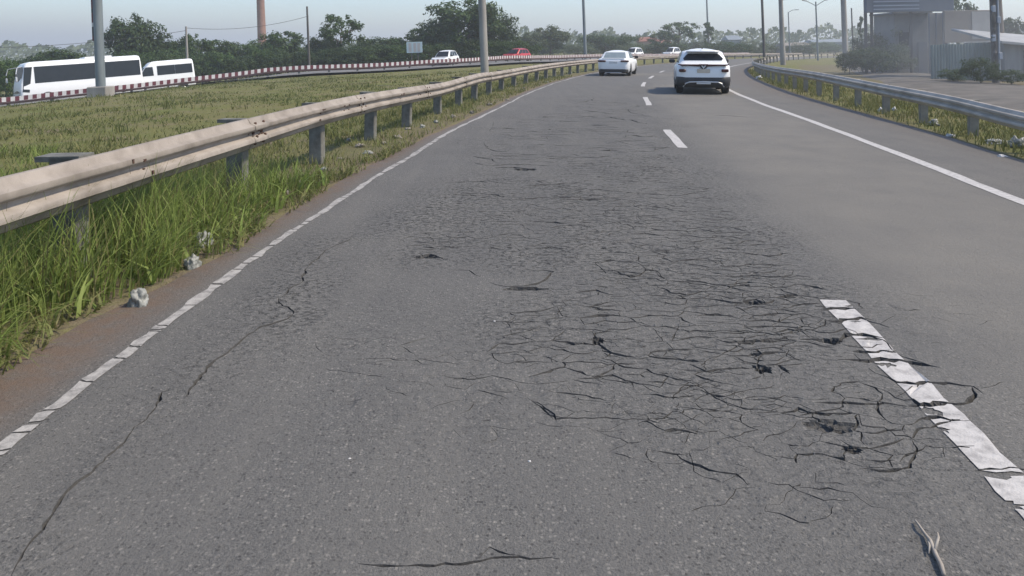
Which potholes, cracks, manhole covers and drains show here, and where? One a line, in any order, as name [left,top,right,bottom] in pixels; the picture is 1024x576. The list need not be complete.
crack [358,547,559,567]
pothole [751,365,773,374]
pothole [801,419,861,434]
crack [315,145,1024,524]
crack [11,239,350,576]
